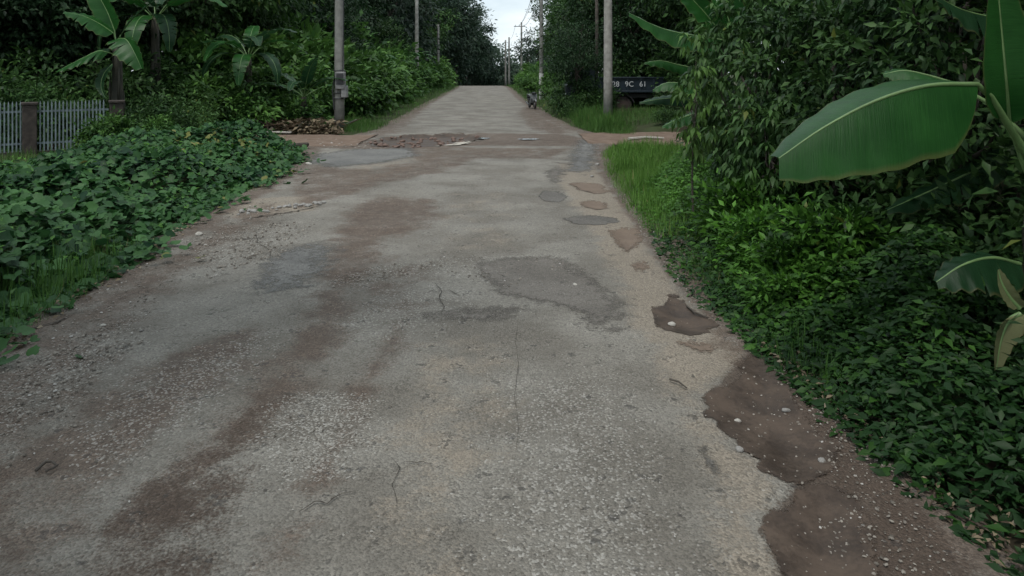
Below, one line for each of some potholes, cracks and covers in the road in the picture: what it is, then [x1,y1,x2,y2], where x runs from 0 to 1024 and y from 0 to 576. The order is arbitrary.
pothole [651,293,720,335]
pothole [370,133,478,148]
crack [391,457,432,502]
pothole [758,481,879,576]
pothole [701,350,841,485]
